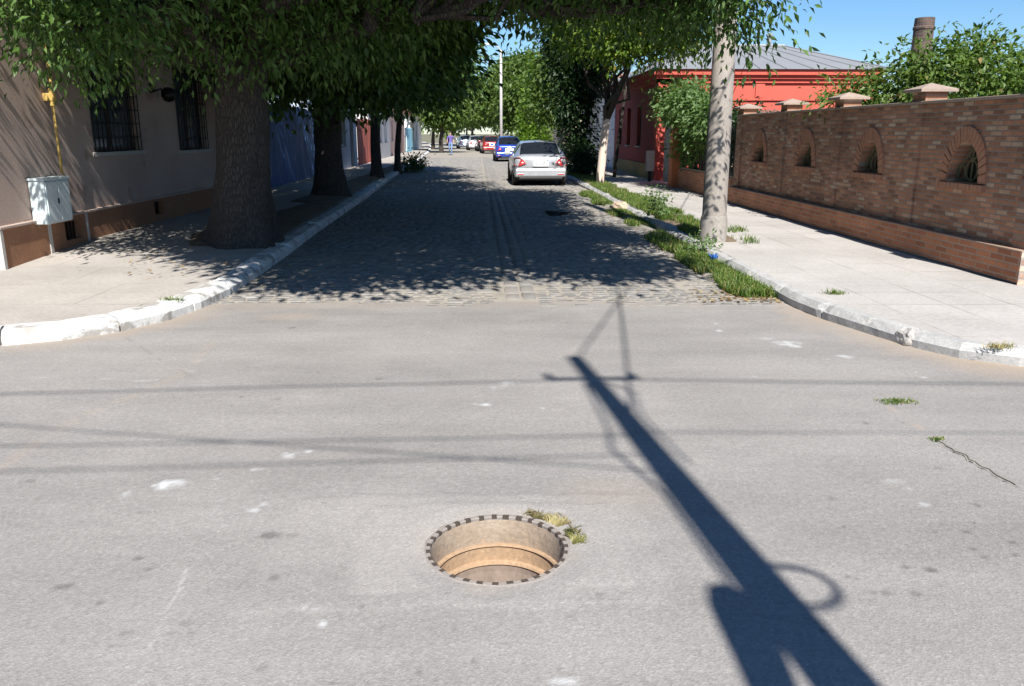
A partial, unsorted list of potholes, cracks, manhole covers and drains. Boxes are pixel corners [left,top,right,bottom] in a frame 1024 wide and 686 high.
manhole cover [424,514,571,587]
crack [933,436,1016,485]
